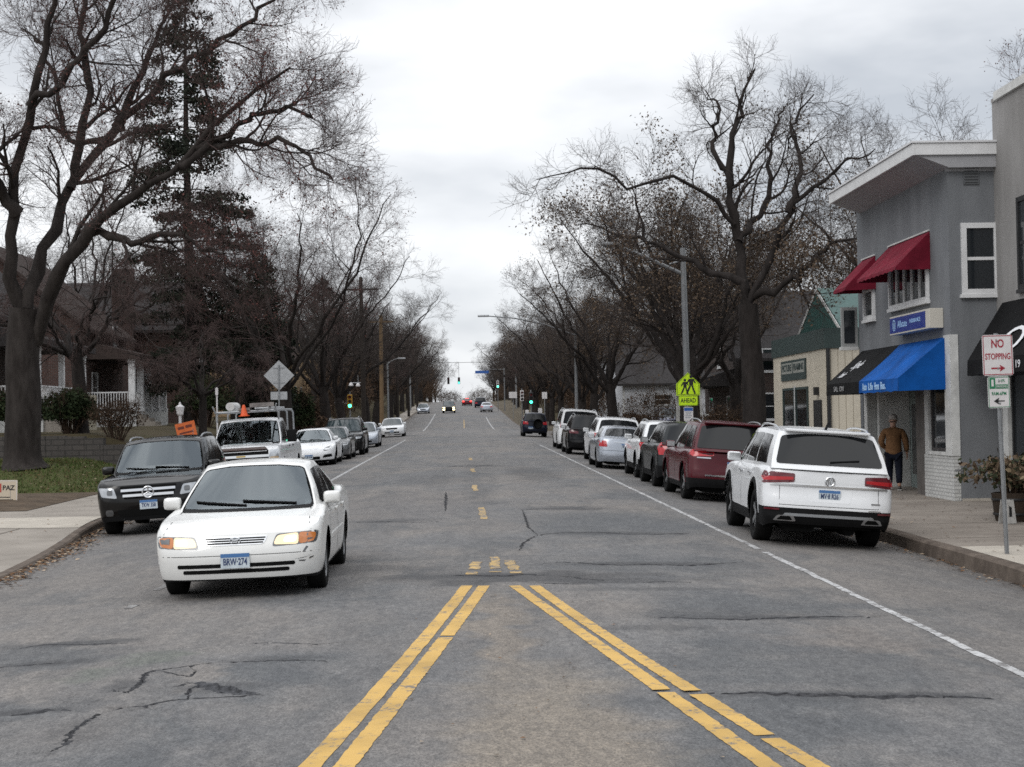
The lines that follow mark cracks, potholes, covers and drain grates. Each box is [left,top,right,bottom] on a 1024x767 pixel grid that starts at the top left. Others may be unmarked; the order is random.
crack [11,642,327,757]
pothole [193,681,258,695]
crack [519,509,737,584]
